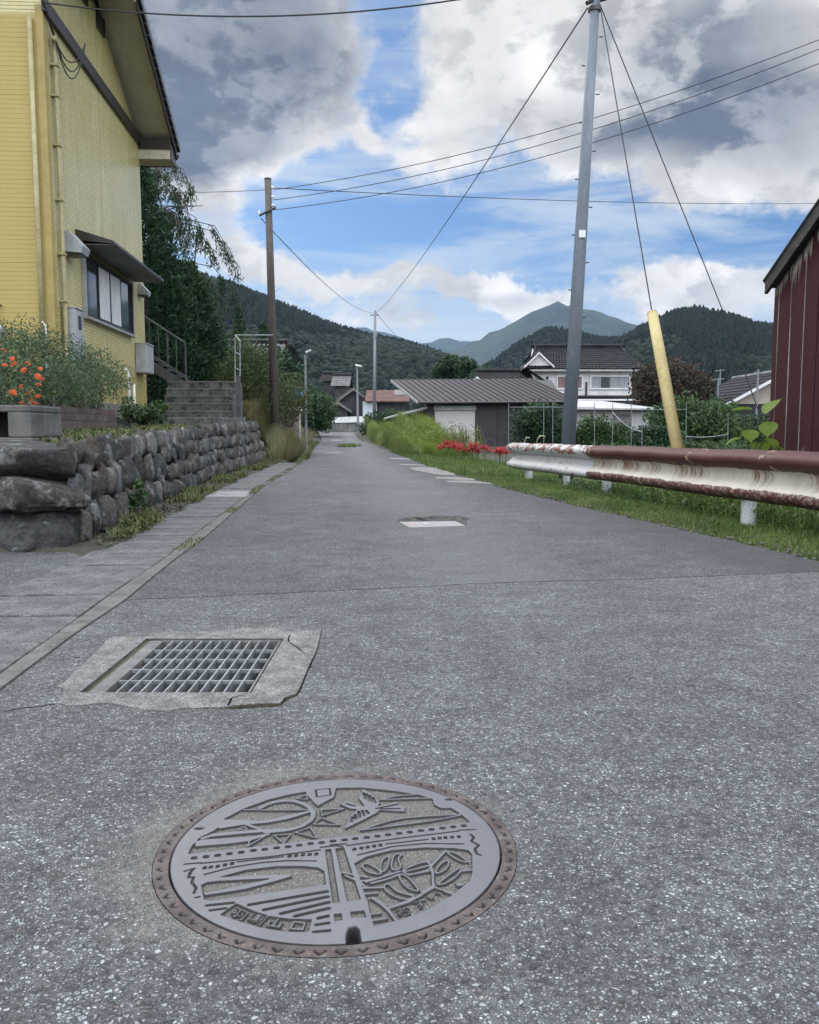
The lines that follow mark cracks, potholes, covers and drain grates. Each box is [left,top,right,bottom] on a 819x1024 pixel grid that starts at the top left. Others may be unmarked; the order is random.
manhole cover [152,774,517,958]
crack [180,631,322,710]
